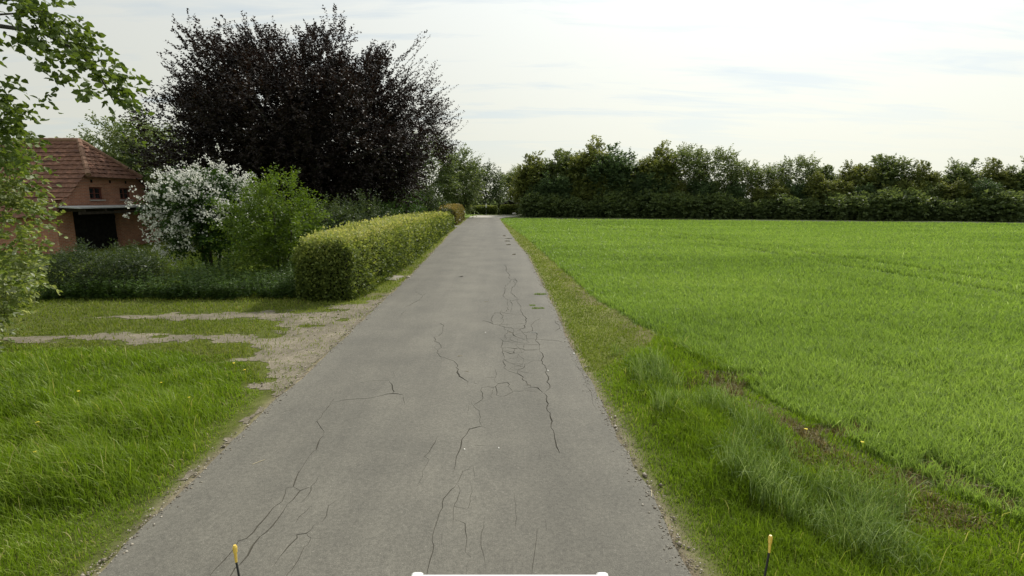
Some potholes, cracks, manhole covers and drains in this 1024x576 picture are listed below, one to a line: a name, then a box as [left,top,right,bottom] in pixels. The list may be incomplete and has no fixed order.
crack [427,266,561,573]
crack [211,372,405,576]
